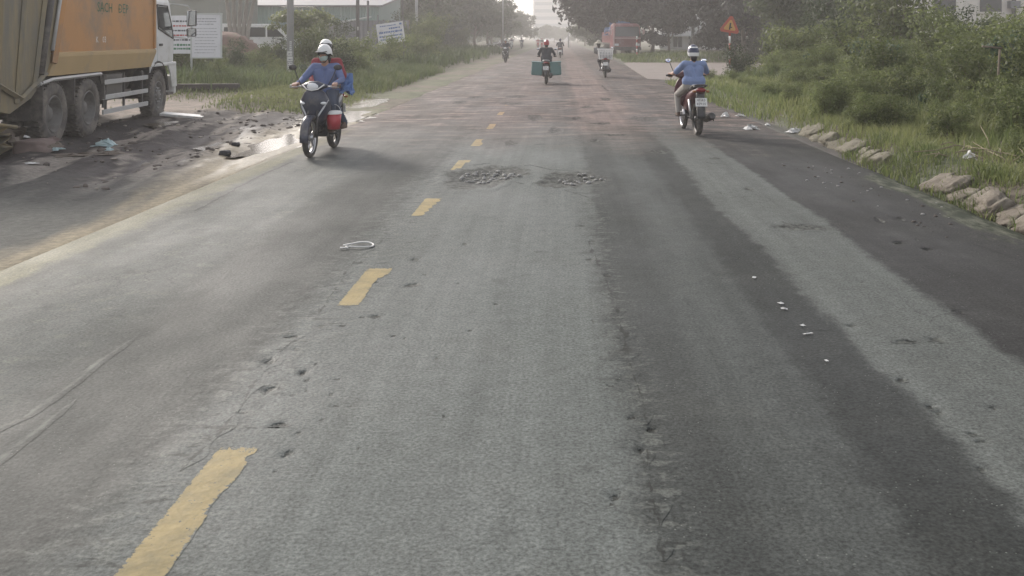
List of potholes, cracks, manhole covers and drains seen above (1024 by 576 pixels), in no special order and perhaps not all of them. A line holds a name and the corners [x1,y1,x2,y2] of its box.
pothole [524,170,624,191]
pothole [430,163,543,194]
